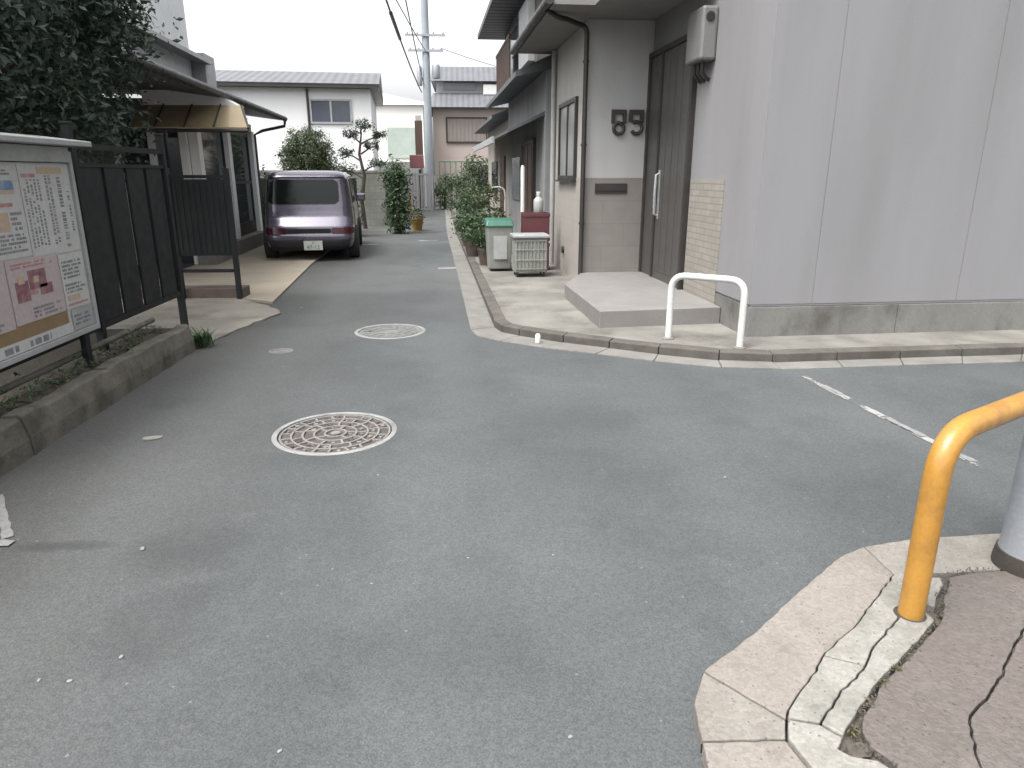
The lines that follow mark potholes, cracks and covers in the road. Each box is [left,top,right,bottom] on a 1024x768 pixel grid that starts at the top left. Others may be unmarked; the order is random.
manhole cover [271,412,397,456]
crack [968,630,1024,760]
manhole cover [354,324,426,339]
